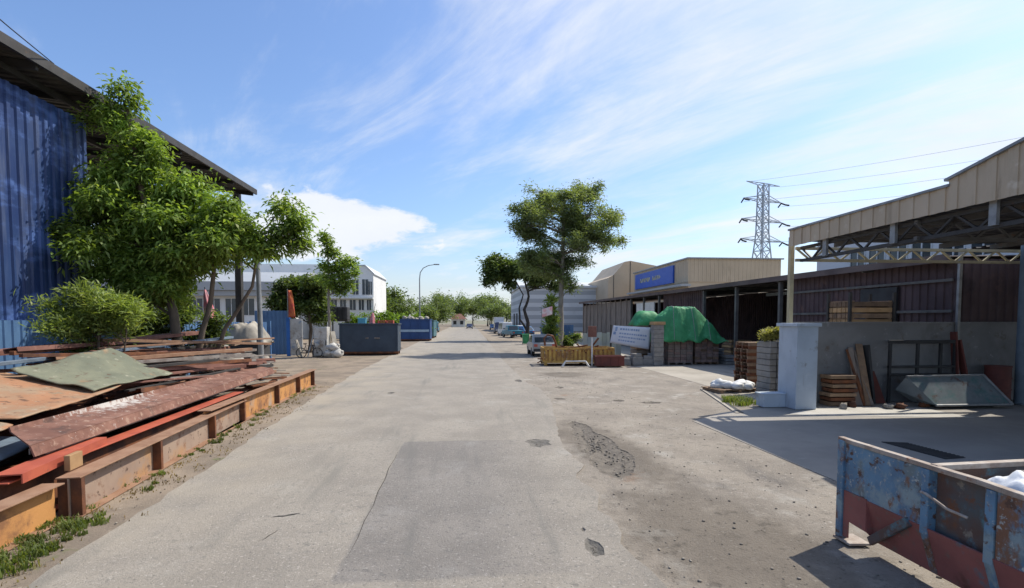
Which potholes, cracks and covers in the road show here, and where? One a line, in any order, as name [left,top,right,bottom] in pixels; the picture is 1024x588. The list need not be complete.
pothole [525,439,551,447]
pothole [567,422,635,479]
pothole [585,538,604,557]
